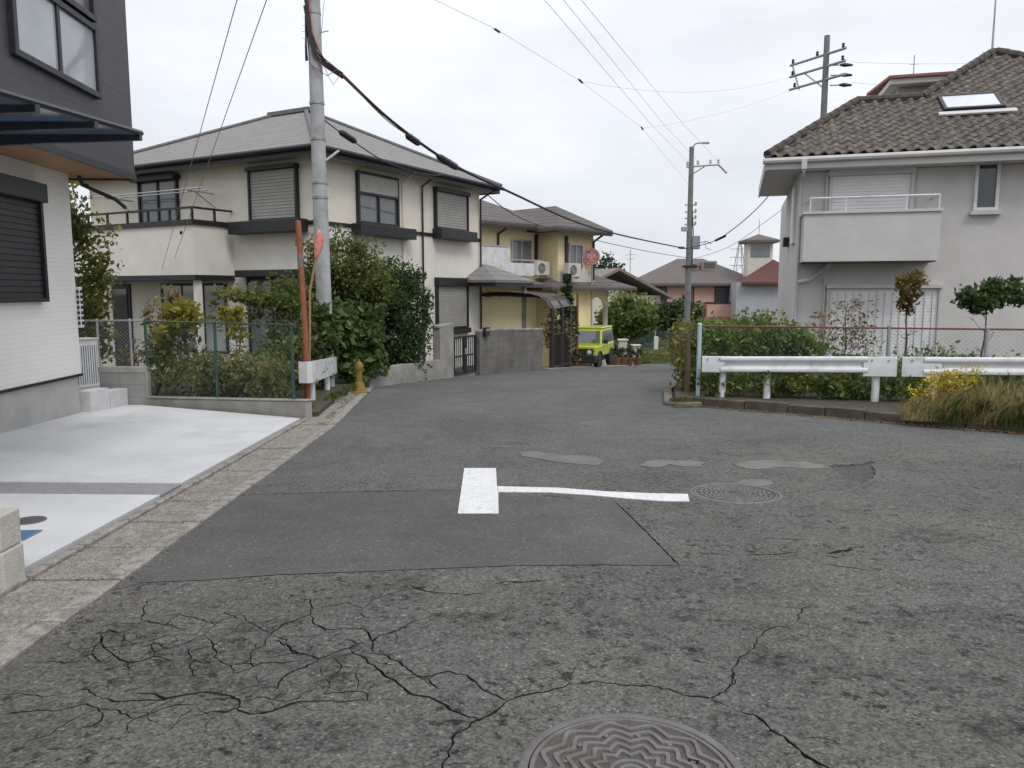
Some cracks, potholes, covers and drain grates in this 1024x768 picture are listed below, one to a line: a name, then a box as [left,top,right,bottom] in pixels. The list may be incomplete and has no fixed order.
crack [823,546,870,571]
crack [5,585,841,768]
manhole cover [480,441,534,450]
manhole cover [518,713,743,768]
manhole cover [690,483,783,504]
